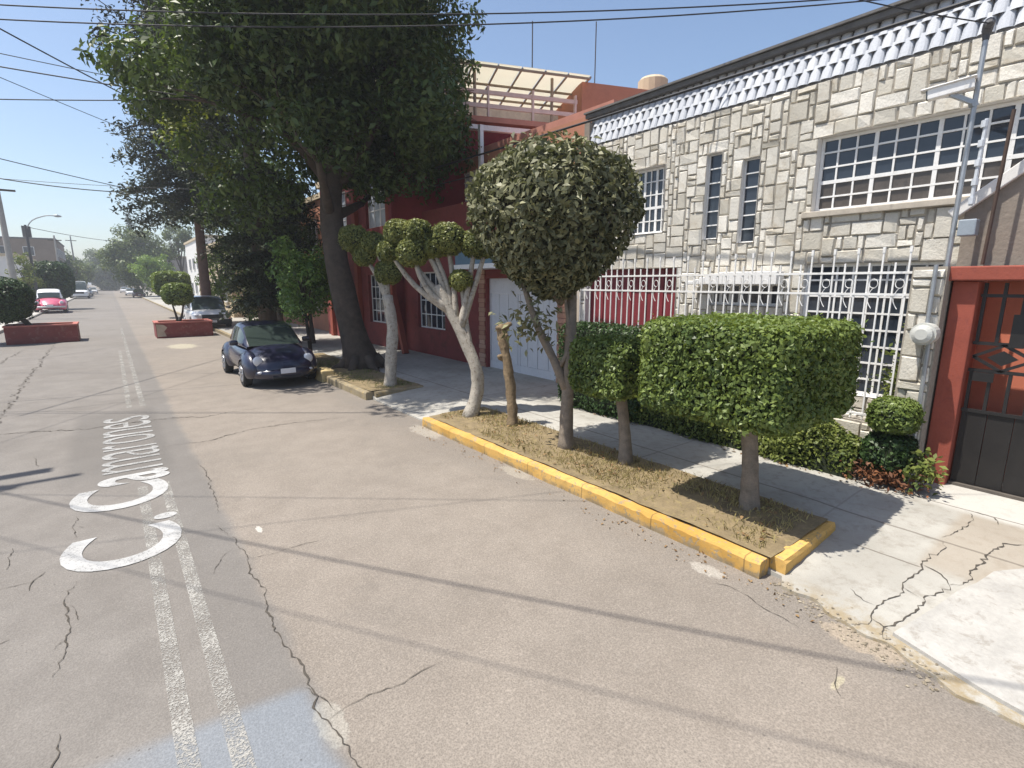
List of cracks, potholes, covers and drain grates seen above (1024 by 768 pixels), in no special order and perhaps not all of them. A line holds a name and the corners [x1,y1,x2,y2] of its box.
crack [850,510,1022,636]
crack [53,582,78,675]
